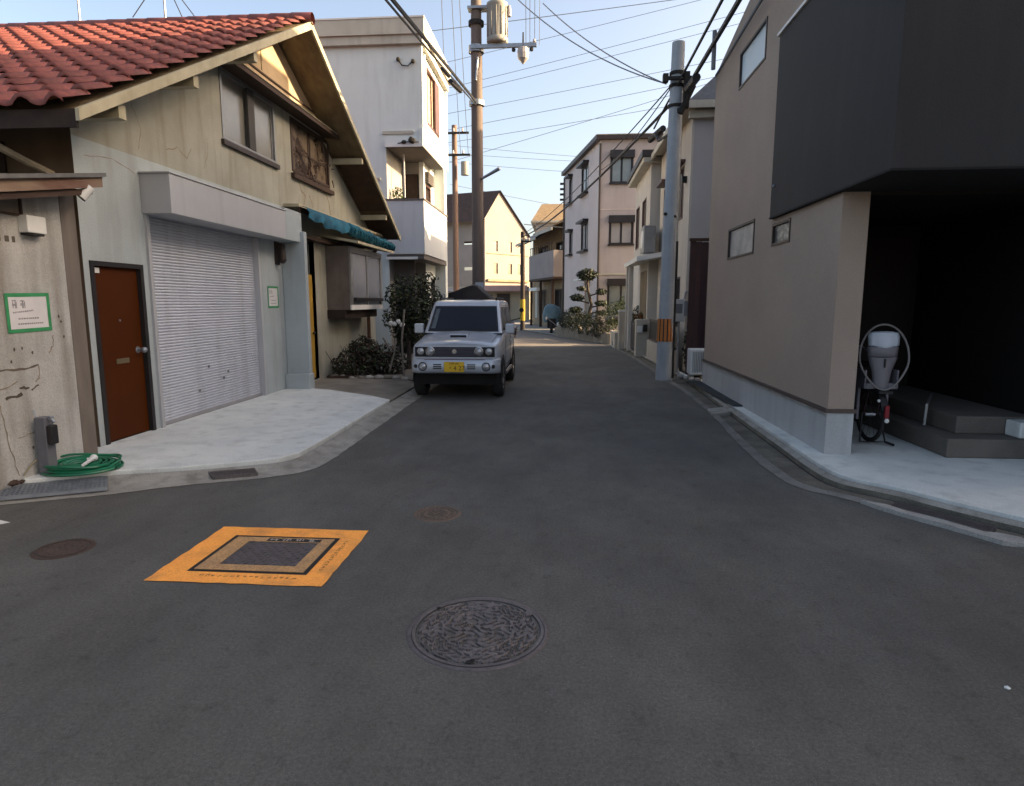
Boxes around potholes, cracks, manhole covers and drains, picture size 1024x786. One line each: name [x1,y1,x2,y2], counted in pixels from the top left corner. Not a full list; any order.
manhole cover [145,527,368,586]
manhole cover [406,597,549,671]
drain grate [688,380,743,407]
manhole cover [30,538,97,560]
manhole cover [413,506,461,522]
drain grate [0,476,108,501]
drain grate [208,467,258,480]
